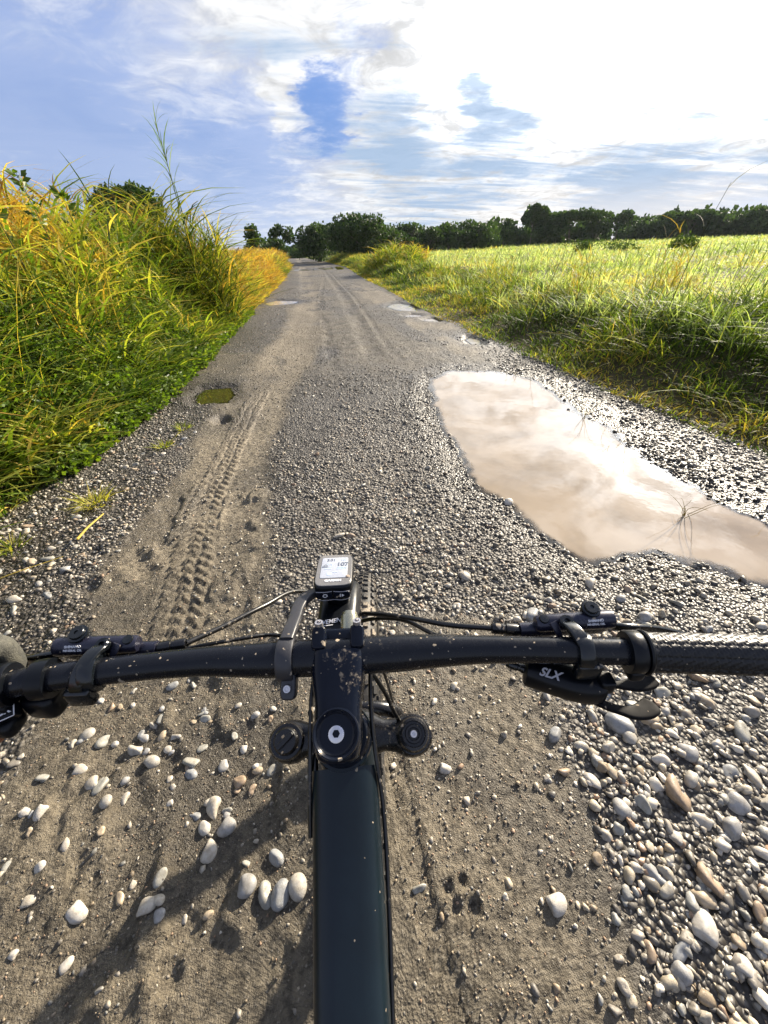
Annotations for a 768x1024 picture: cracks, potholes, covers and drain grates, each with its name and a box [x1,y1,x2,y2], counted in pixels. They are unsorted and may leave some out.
pothole [422,368,768,595]
pothole [459,334,490,345]
pothole [383,301,422,311]
pothole [187,383,241,406]
